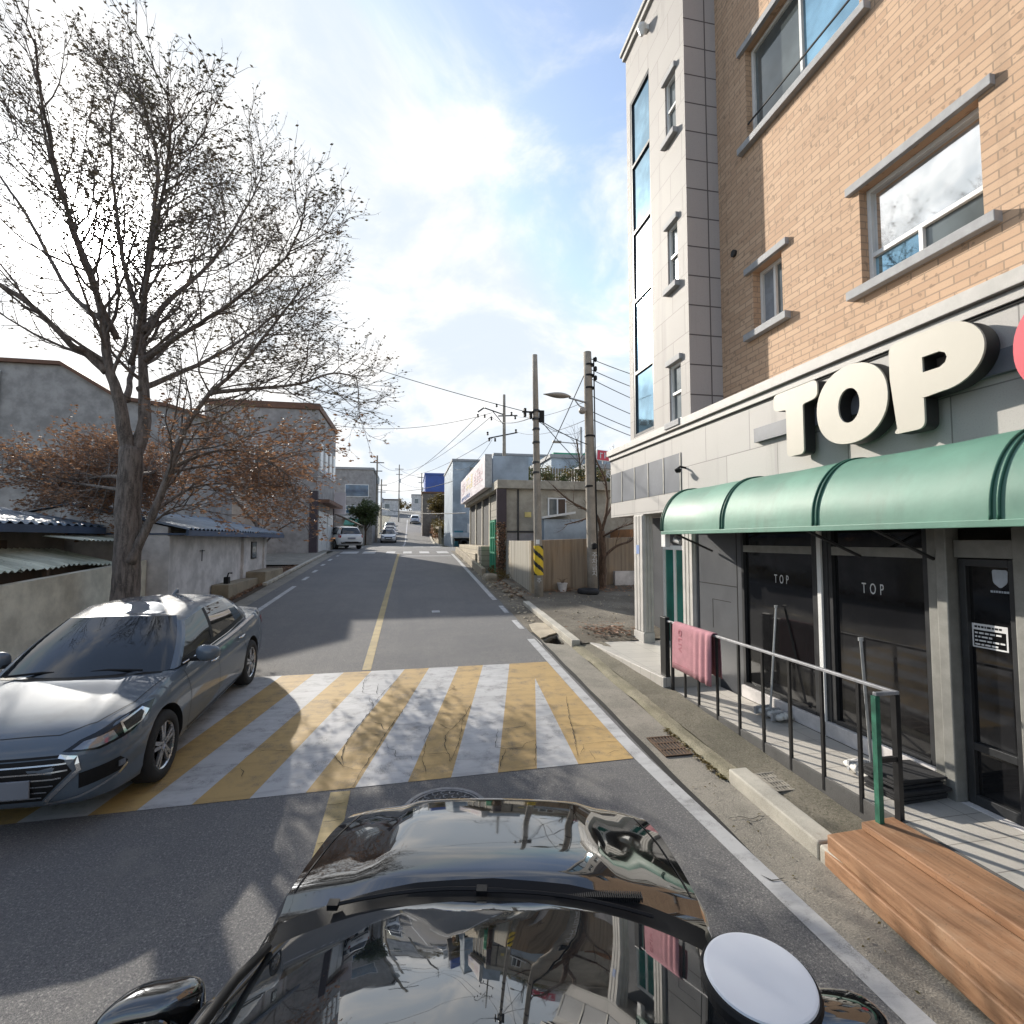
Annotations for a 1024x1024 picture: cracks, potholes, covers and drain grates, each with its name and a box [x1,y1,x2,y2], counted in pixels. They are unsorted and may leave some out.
crack [333,678,471,788]
crack [566,698,618,757]
drain grate [754,771,795,793]
drain grate [647,735,693,758]
manhole cover [404,787,484,805]
